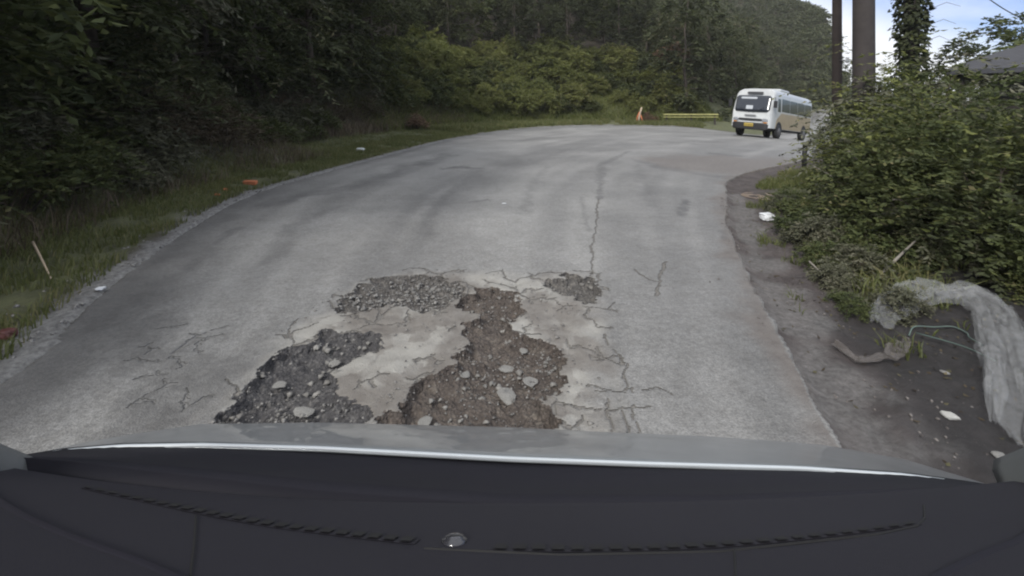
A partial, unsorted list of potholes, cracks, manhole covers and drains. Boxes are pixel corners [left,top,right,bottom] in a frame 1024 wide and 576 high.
crack [124,325,228,412]
crack [589,199,600,273]
pothole [330,274,467,315]
pothole [209,328,385,424]
pothole [542,272,603,305]
crack [225,268,672,433]
pothole [374,287,568,429]
crack [634,262,667,296]
